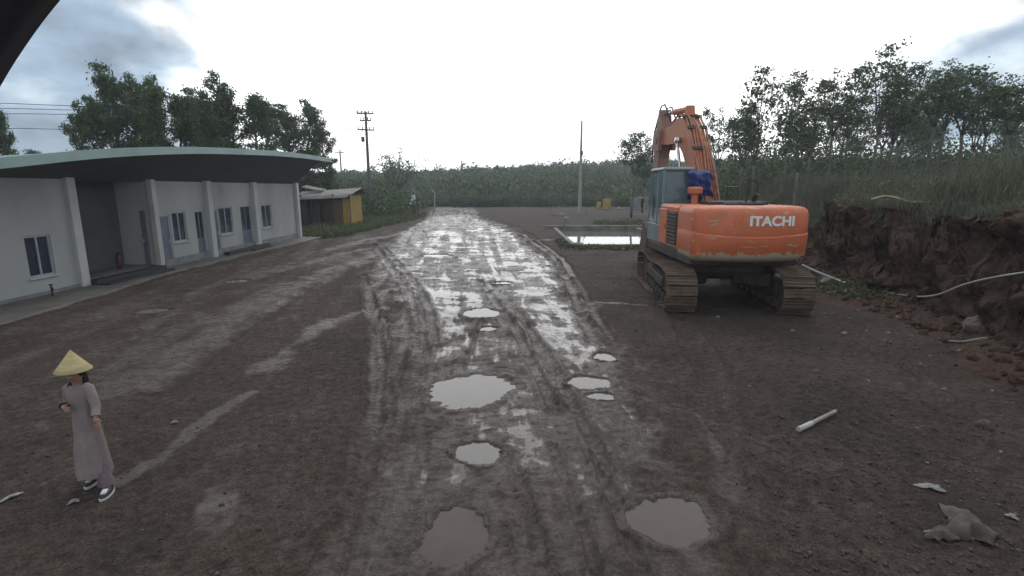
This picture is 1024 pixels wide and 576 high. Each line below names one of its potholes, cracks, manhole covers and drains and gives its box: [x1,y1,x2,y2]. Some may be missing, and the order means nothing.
pothole [458,307,508,320]
pothole [407,499,499,576]
pothole [445,439,510,470]
pothole [418,370,527,415]
pothole [591,350,619,362]
pothole [615,491,720,554]
pothole [581,391,618,401]
pothole [561,372,619,391]
